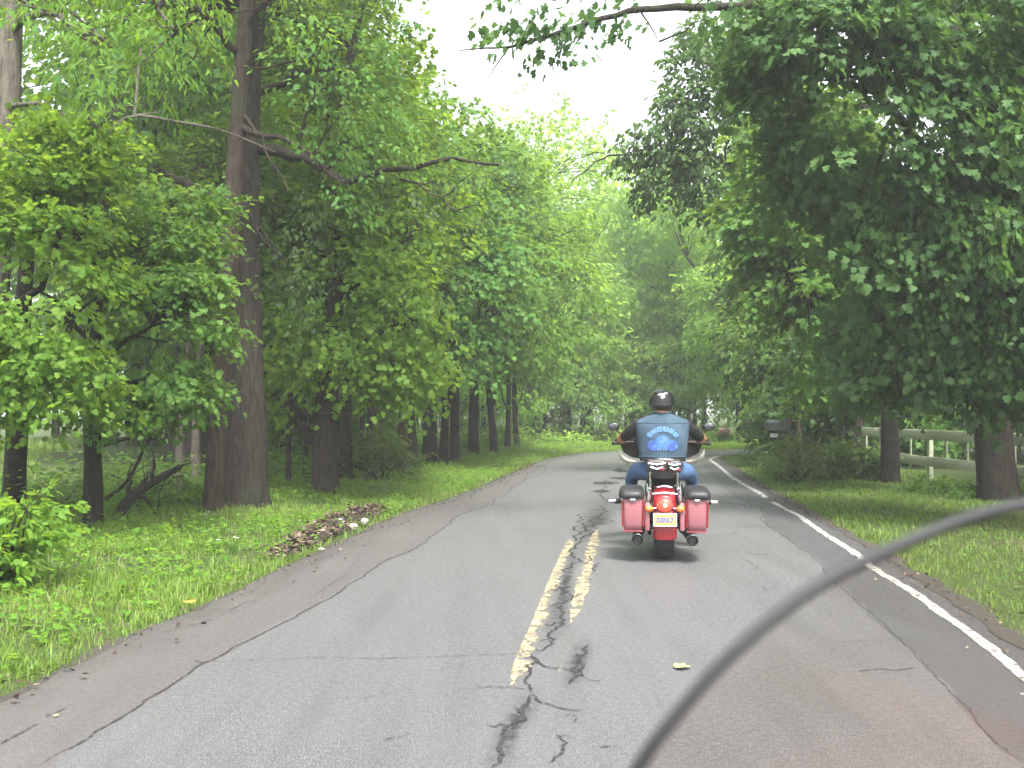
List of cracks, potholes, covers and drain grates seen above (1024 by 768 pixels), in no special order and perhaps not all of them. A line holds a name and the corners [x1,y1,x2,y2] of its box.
crack [36,458,623,767]
